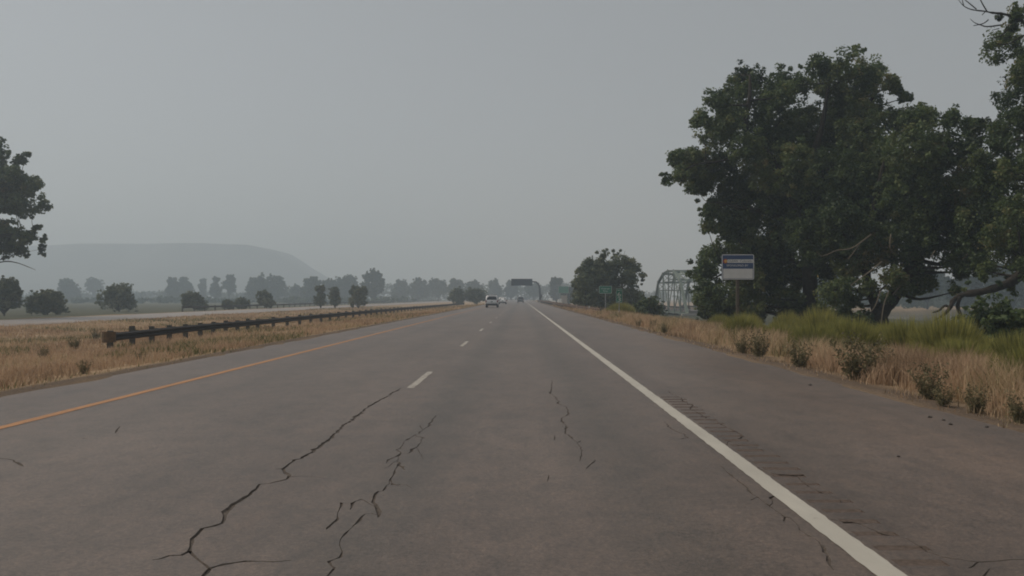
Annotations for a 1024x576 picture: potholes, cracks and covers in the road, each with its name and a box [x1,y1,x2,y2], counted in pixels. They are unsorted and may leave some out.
crack [154,388,401,576]
crack [326,416,436,576]
crack [549,385,596,469]
